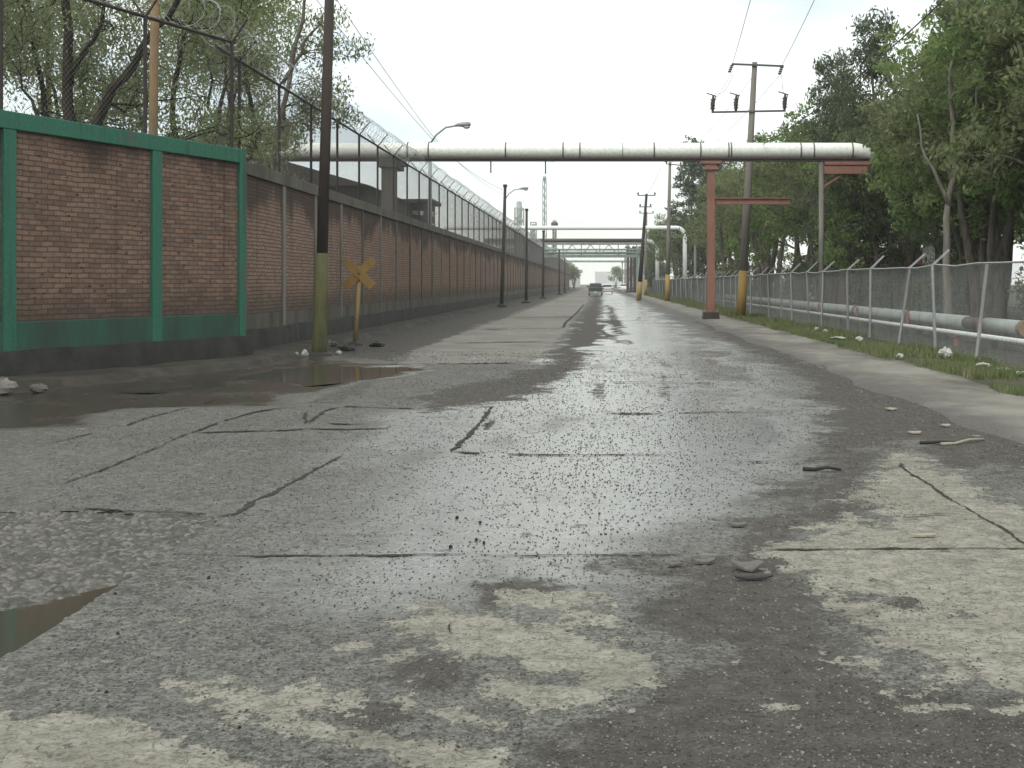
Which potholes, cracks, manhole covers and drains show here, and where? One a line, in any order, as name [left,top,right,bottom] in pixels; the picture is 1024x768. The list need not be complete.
crack [450,407,665,455]
crack [220,456,340,517]
crack [766,462,1024,550]
crack [55,399,426,483]
